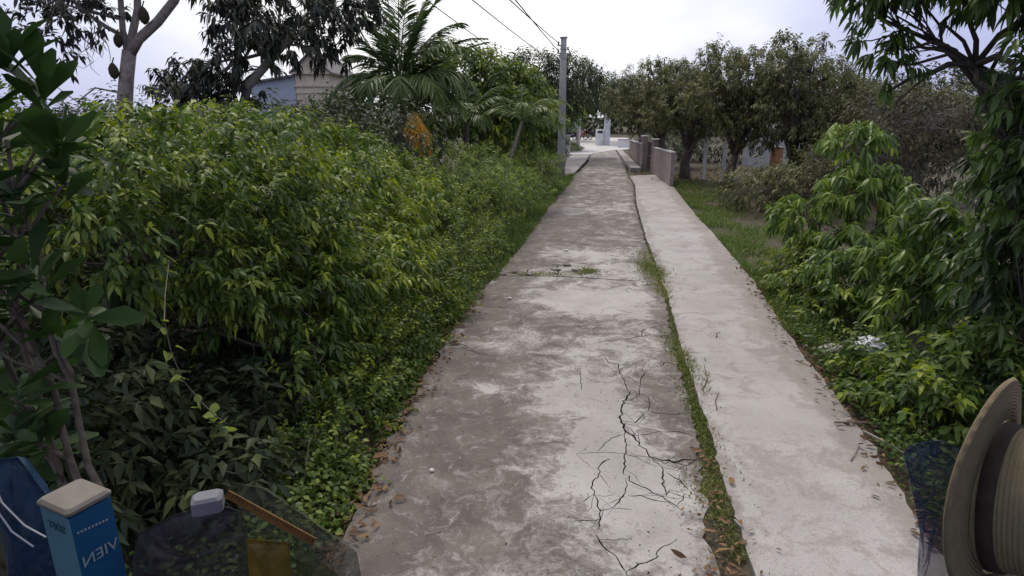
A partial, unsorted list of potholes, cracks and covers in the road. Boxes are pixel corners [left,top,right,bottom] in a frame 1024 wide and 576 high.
crack [576,355,697,573]
